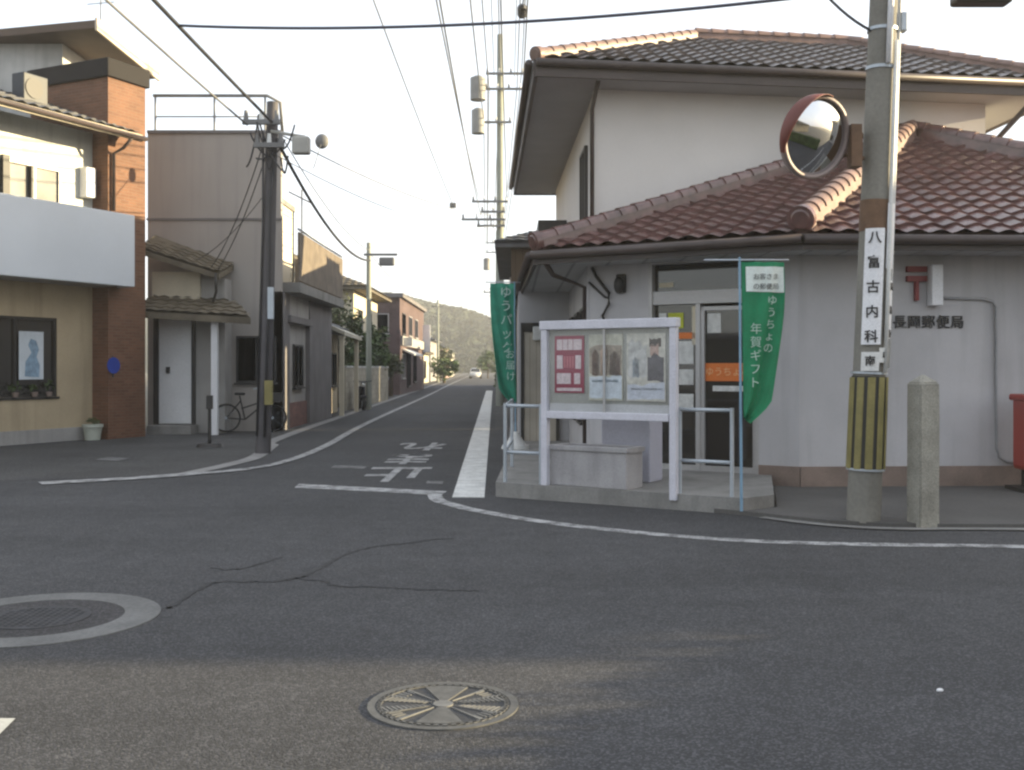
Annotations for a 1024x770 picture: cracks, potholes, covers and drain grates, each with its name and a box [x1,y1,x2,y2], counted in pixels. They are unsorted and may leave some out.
manhole cover [367,682,519,731]
manhole cover [0,593,161,648]
crack [166,538,479,608]
